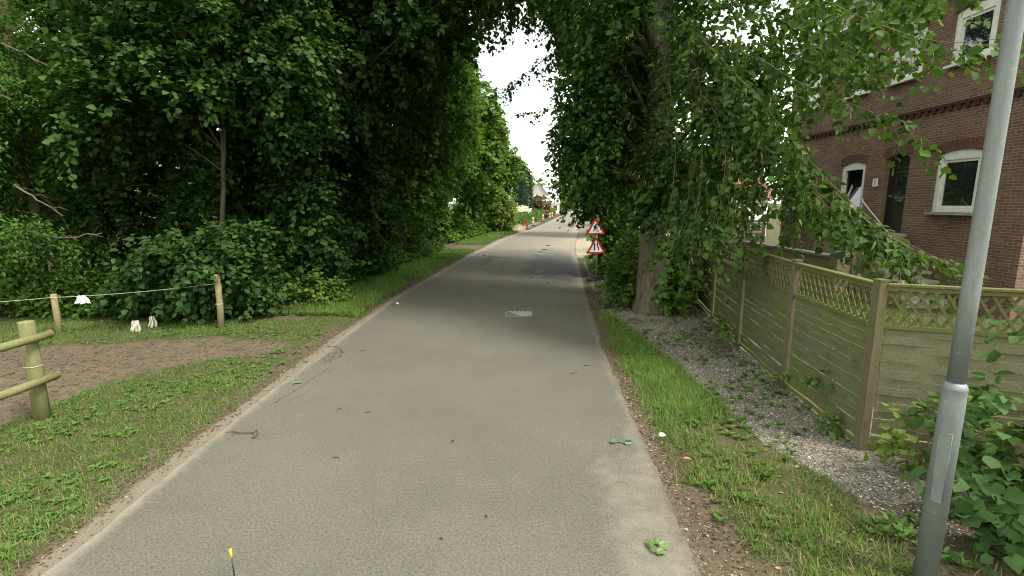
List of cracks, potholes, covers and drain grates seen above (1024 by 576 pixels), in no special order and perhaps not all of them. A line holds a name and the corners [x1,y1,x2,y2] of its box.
crack [271,356,353,405]
